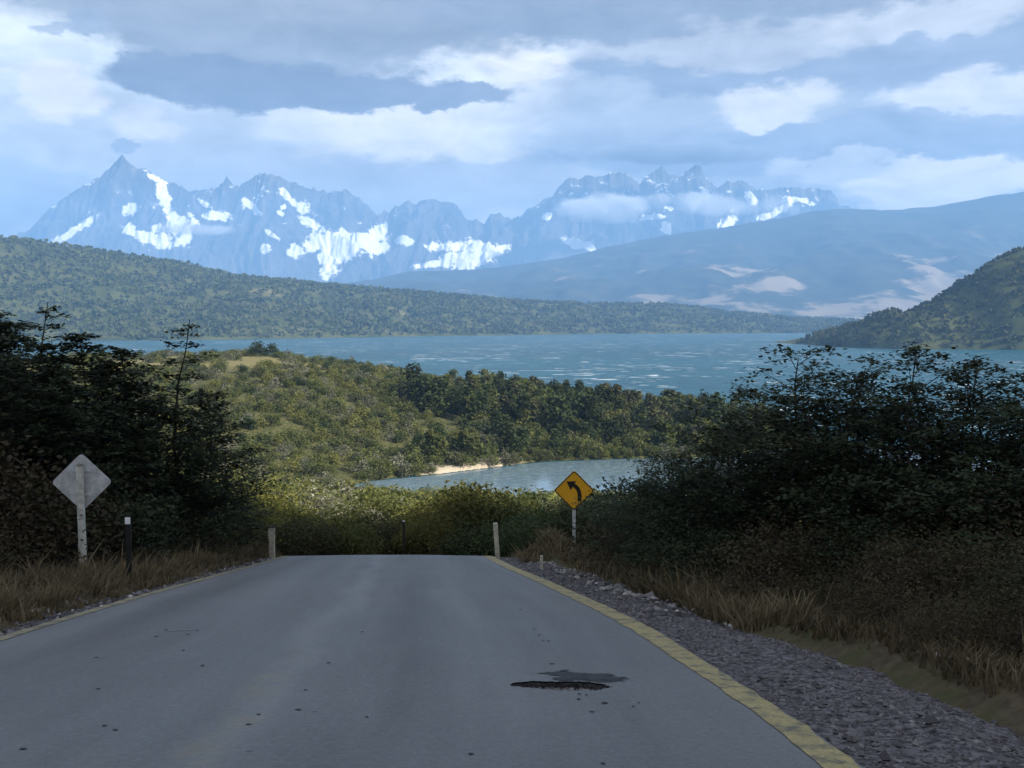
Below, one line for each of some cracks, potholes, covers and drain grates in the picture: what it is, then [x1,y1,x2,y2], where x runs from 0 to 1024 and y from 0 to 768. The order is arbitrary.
pothole [509,681,611,691]
pothole [546,672,629,682]
